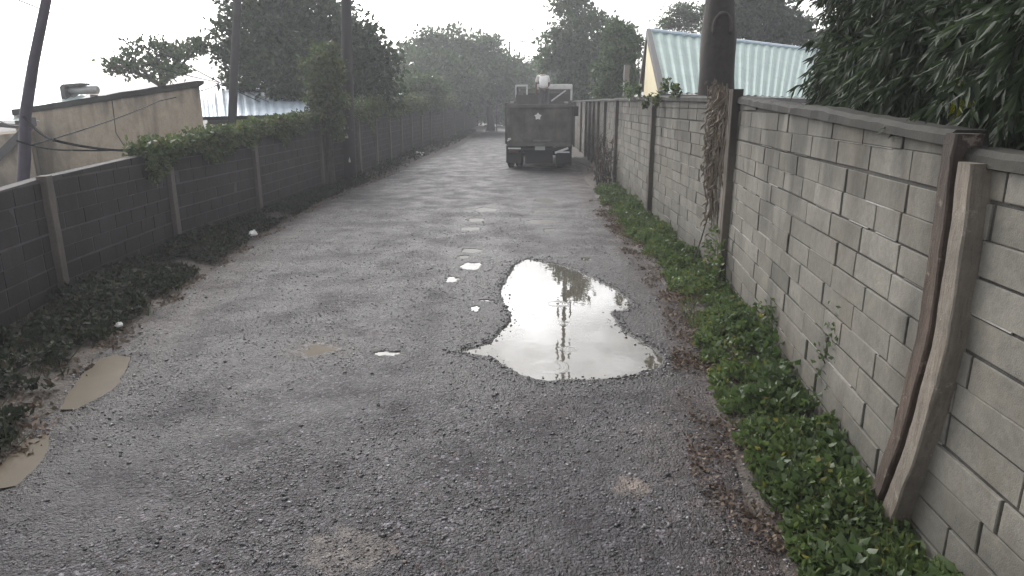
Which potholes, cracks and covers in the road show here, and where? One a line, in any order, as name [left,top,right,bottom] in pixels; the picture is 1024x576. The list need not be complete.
pothole [456,257,665,381]
